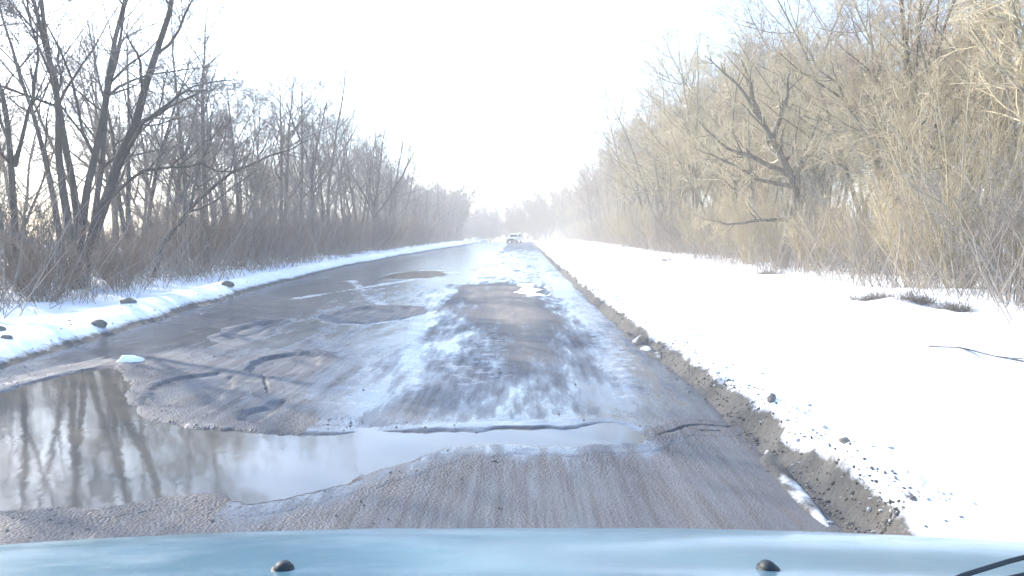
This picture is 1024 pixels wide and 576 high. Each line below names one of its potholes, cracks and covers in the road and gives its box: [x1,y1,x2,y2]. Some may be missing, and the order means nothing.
pothole [0,361,688,527]
pothole [205,318,296,343]
crack [641,419,745,440]
pothole [314,304,432,325]
